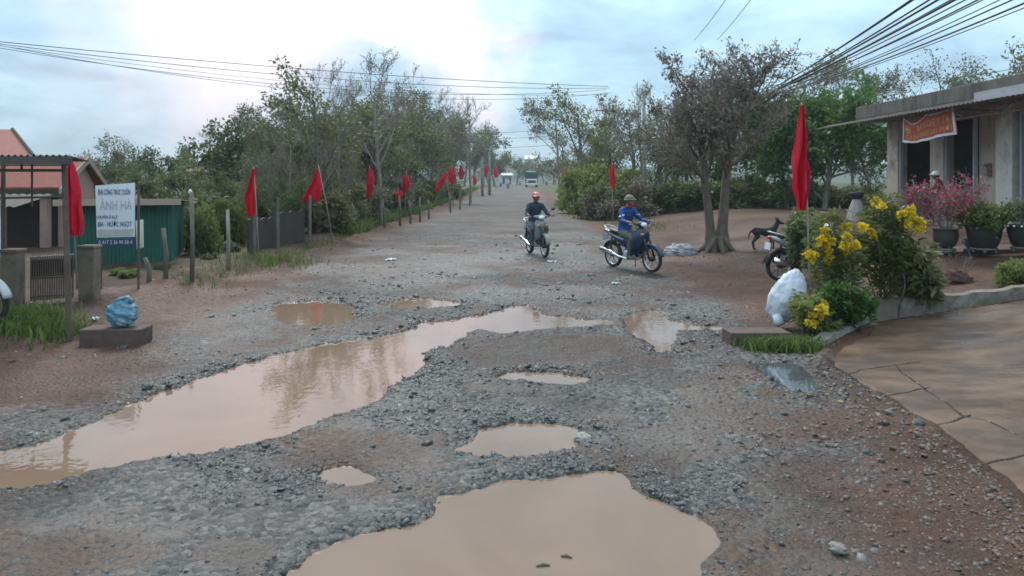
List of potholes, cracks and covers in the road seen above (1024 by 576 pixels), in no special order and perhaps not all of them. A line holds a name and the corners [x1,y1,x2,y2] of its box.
pothole [608,307,734,354]
pothole [378,296,473,309]
pothole [745,354,843,394]
pothole [253,456,750,576]
pothole [0,302,617,493]
pothole [262,297,364,326]
